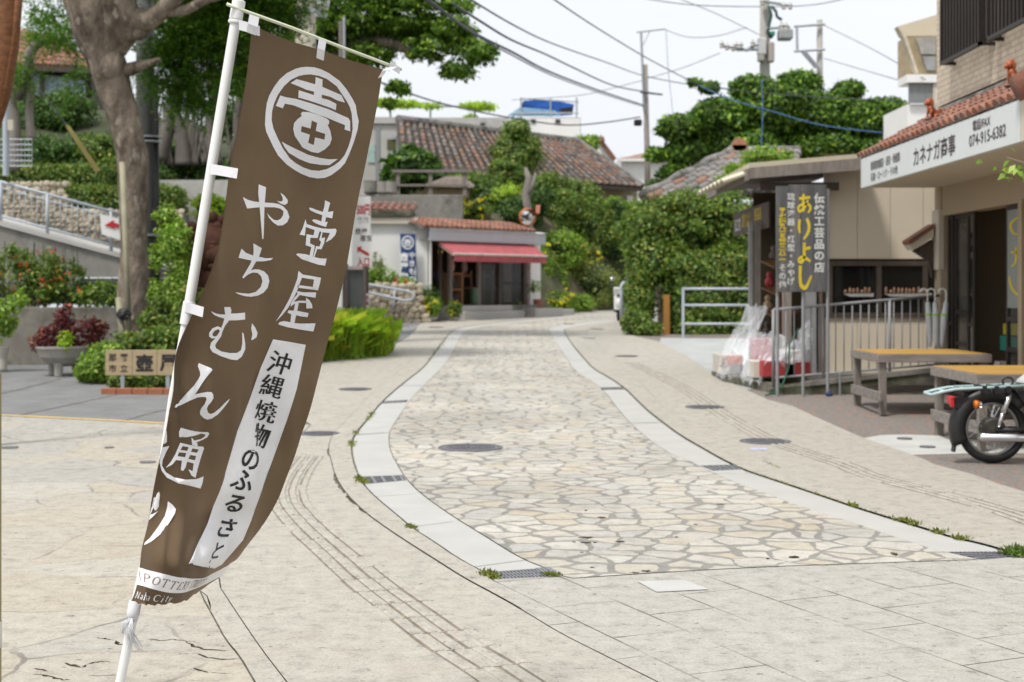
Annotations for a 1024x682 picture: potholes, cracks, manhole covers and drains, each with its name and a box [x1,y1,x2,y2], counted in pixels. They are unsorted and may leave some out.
crack [151,639,237,674]
drain grate [948,551,1015,560]
drain grate [362,475,406,486]
manhole cover [438,443,503,451]
crack [33,637,123,680]
drain grate [496,567,564,579]
